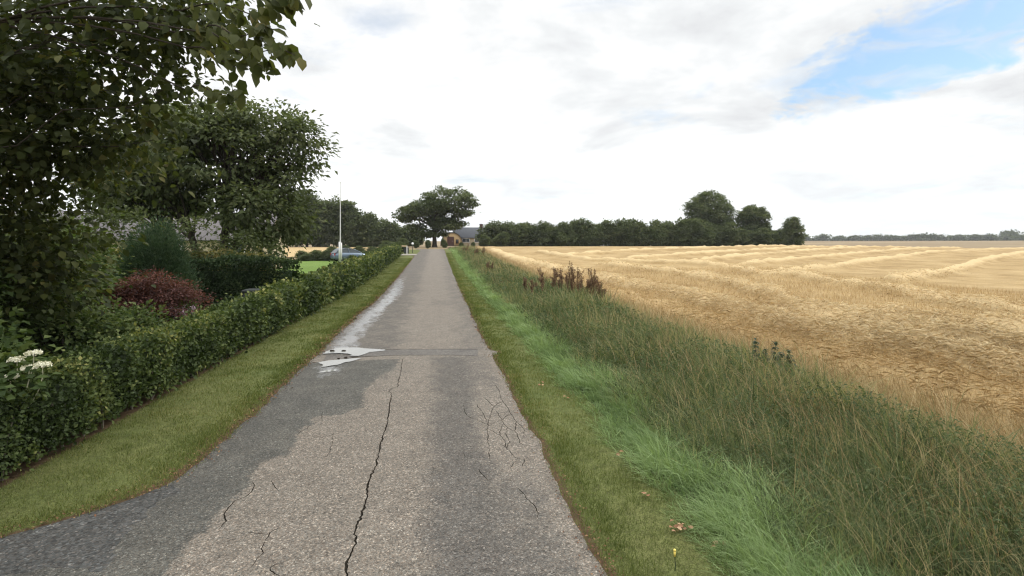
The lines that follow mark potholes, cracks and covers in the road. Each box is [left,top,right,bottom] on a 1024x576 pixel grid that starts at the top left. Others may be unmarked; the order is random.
crack [463,386,533,479]
crack [297,349,470,576]
crack [220,481,286,576]
